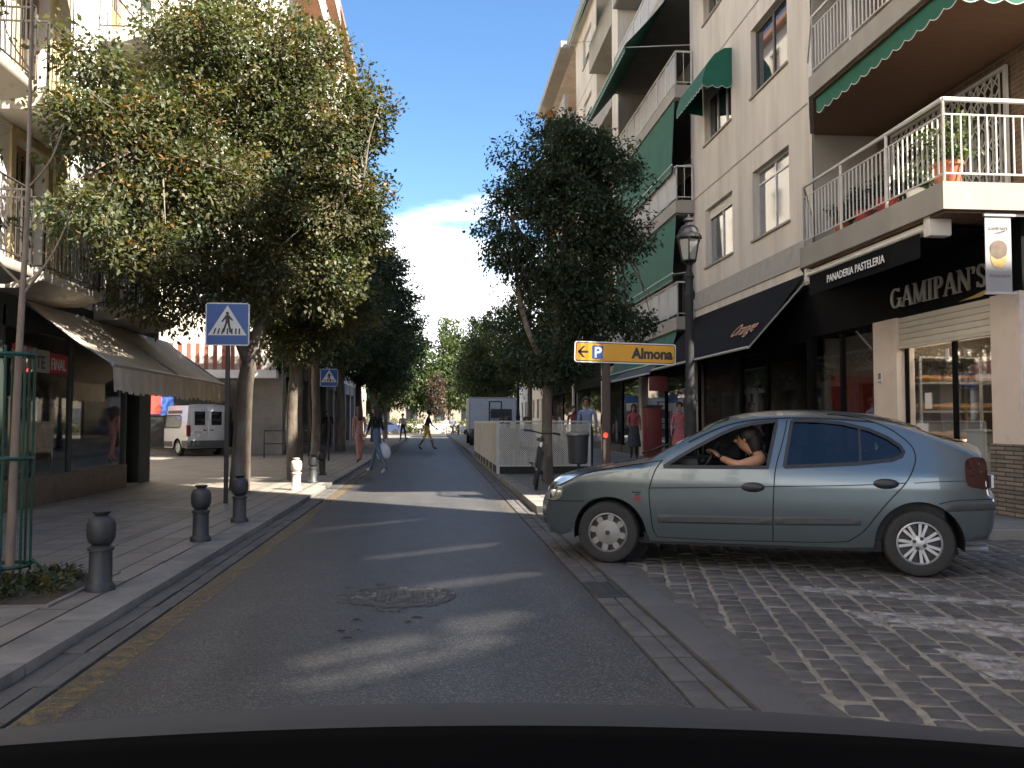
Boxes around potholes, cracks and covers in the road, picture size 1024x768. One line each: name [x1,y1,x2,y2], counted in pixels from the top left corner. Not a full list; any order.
drain grate [583,581,627,599]
manhole cover [347,586,456,608]
